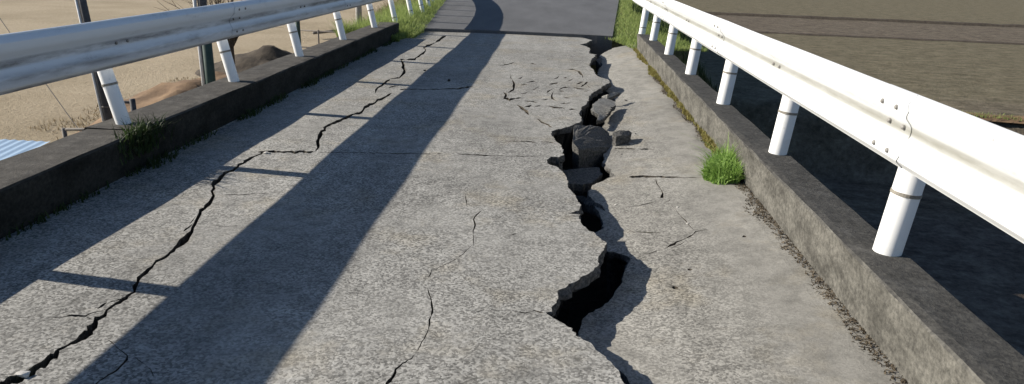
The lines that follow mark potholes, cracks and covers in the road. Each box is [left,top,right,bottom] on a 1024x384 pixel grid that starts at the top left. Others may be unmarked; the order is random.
crack [0,152,264,384]
crack [315,36,472,151]
crack [502,41,702,384]
